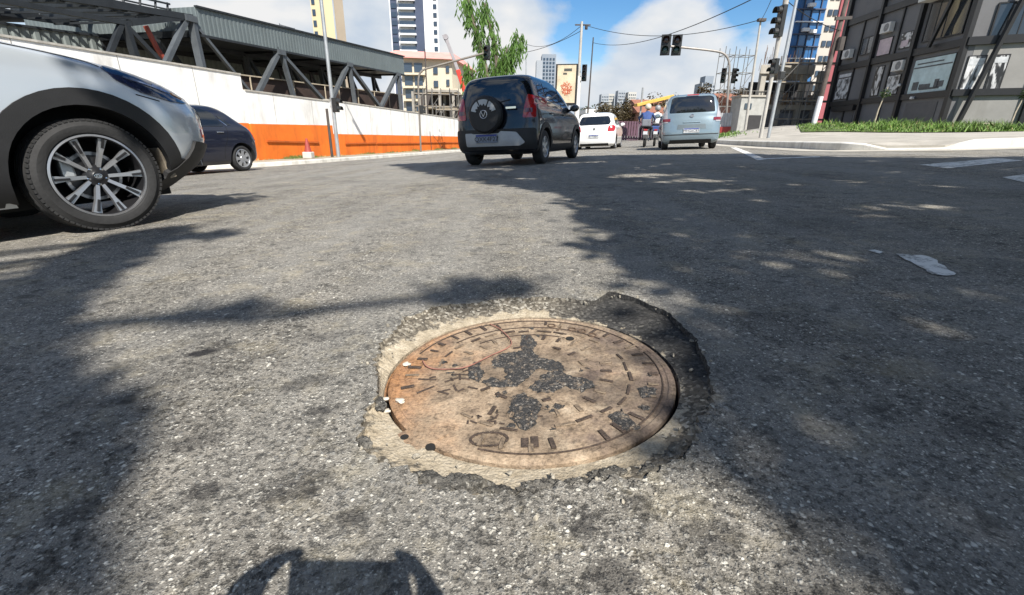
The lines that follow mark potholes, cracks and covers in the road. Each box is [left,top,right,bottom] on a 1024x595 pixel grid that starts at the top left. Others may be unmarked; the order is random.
manhole cover [384,318,680,469]
